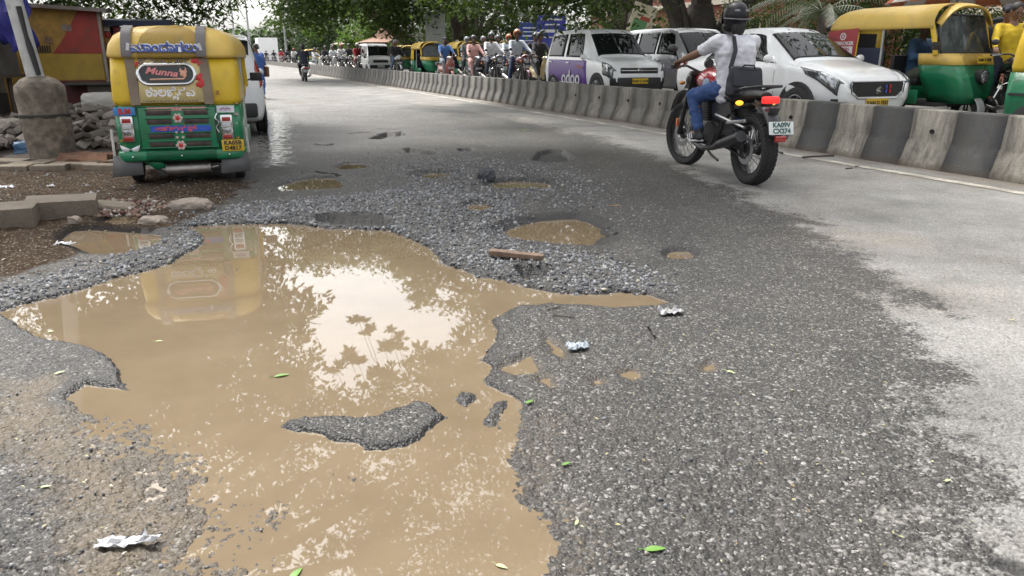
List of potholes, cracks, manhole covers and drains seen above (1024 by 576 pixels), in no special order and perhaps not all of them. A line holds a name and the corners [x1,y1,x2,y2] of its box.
pothole [0,220,671,576]
pothole [366,131,410,139]
pothole [478,176,563,189]
pothole [657,245,703,259]
pothole [485,211,619,245]
pothole [270,175,351,191]
pothole [529,149,577,164]
pothole [328,161,375,169]
